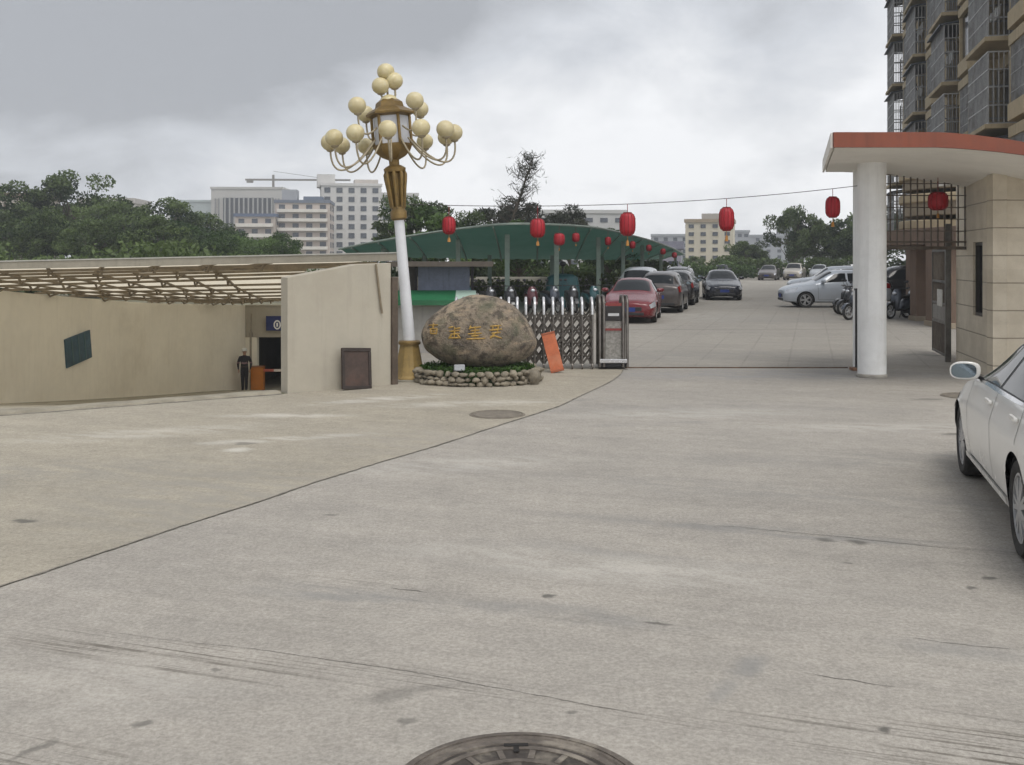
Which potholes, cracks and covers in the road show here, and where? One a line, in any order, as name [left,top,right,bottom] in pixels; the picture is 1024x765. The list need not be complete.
crack [135,636,720,728]
manhole cover [469,410,525,419]
manhole cover [405,732,634,765]
crack [694,524,1016,555]
